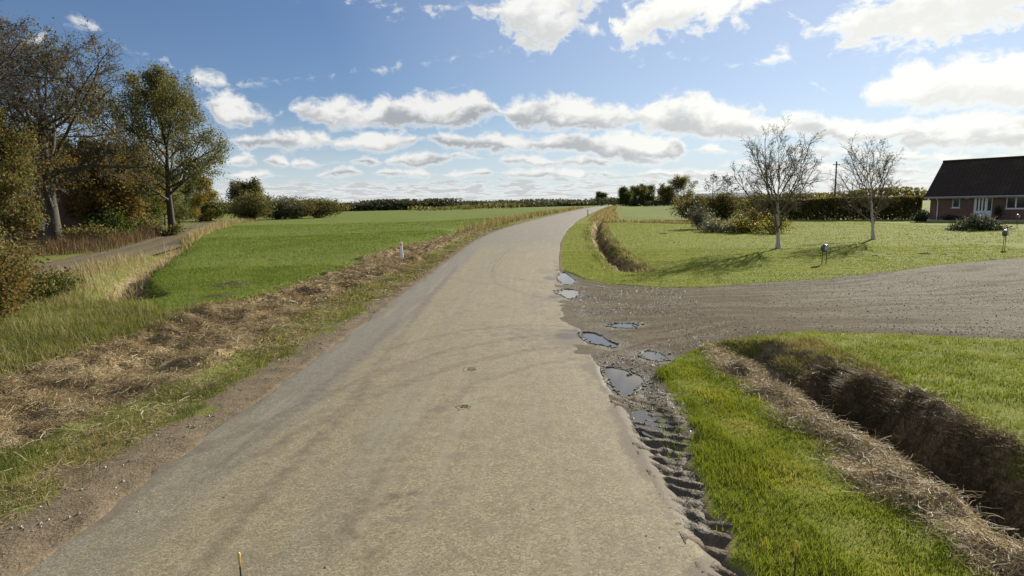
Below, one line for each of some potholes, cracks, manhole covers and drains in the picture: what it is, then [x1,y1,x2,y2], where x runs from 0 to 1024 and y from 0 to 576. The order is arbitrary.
pothole [600,363,653,396]
pothole [557,271,576,285]
pothole [553,288,582,299]
pothole [578,331,620,348]
pothole [637,349,671,362]
